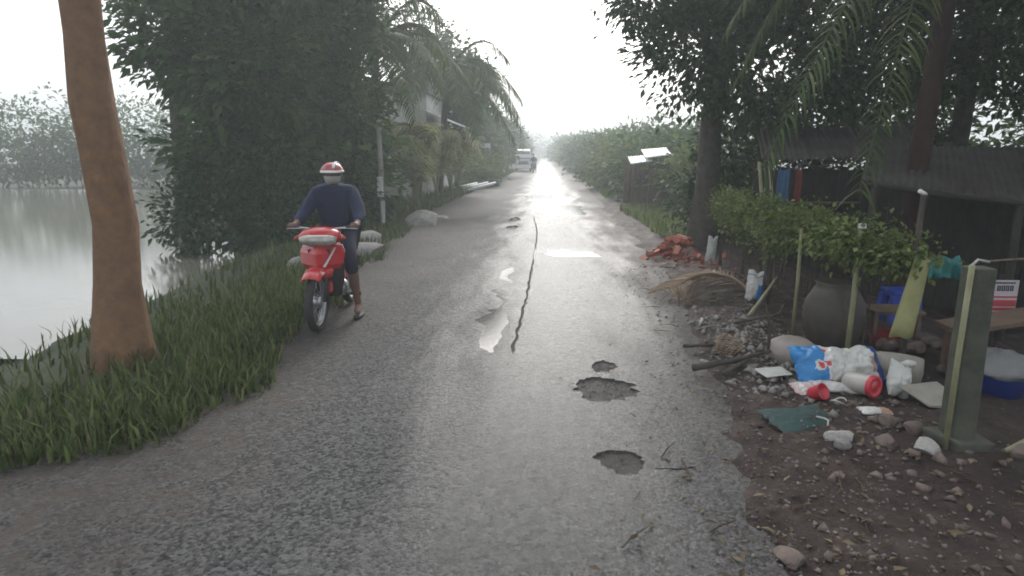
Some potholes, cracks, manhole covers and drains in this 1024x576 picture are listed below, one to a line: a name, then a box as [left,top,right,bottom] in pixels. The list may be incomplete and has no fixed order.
pothole [593,450,644,475]
pothole [591,360,617,372]
pothole [572,377,640,402]
crack [511,218,538,354]
